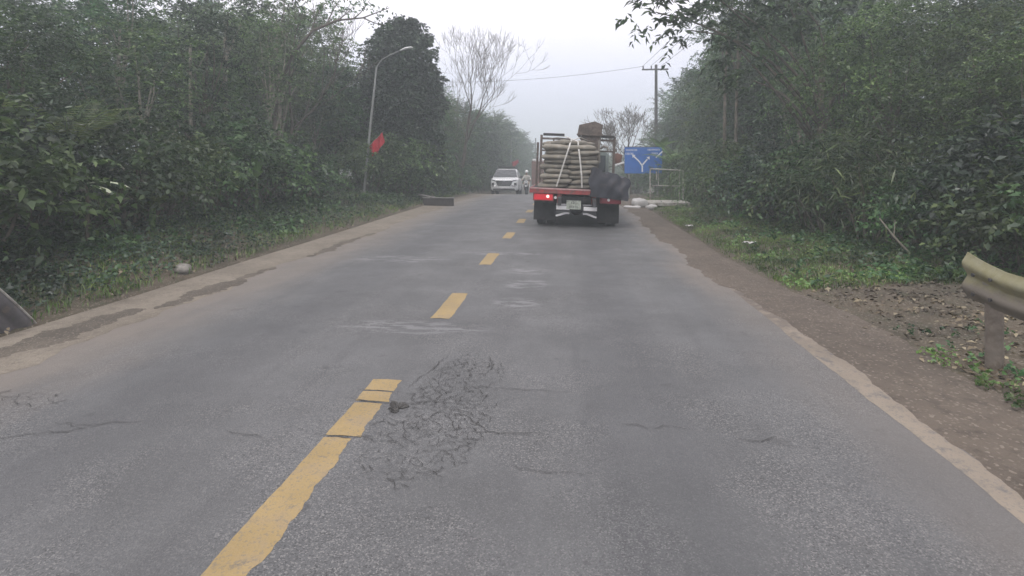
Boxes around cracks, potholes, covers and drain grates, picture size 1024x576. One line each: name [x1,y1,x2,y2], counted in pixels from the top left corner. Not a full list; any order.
crack [359,354,566,487]
crack [0,389,68,413]
crack [1,421,139,438]
